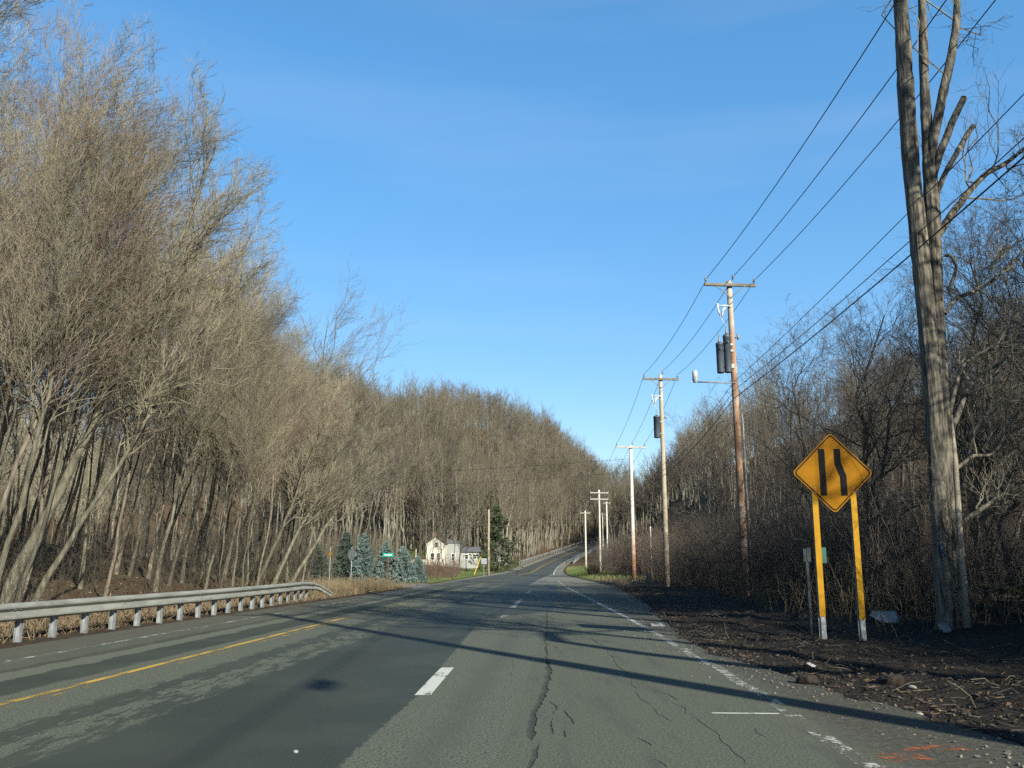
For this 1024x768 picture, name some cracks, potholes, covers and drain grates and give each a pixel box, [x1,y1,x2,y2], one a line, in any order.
crack [591,639,767,765]
crack [525,607,574,768]
